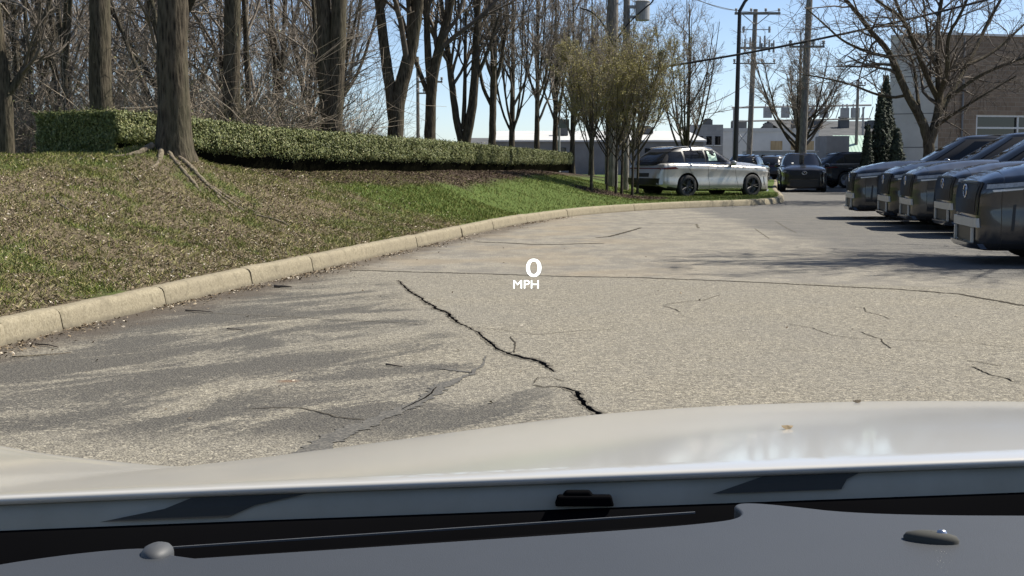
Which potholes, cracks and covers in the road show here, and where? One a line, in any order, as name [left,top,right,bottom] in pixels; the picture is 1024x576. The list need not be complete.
crack [792,307,1015,381]
crack [493,228,640,245]
crack [396,280,607,415]
